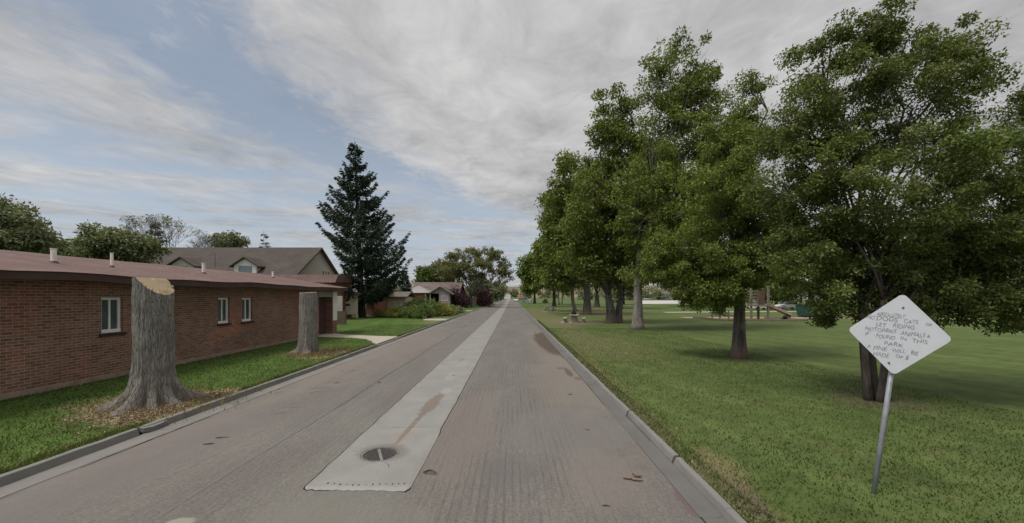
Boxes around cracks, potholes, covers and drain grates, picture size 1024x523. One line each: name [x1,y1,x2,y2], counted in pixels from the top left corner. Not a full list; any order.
manhole cover [360,446,400,462]
